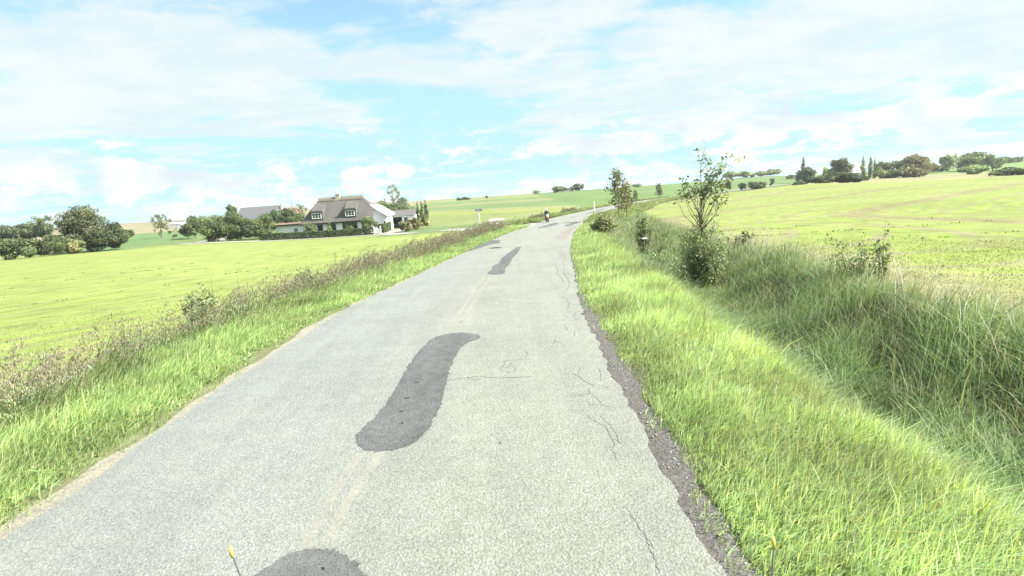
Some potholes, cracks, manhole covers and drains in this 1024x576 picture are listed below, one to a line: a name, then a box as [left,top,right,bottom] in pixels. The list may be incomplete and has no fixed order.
crack [552,254,620,458]
